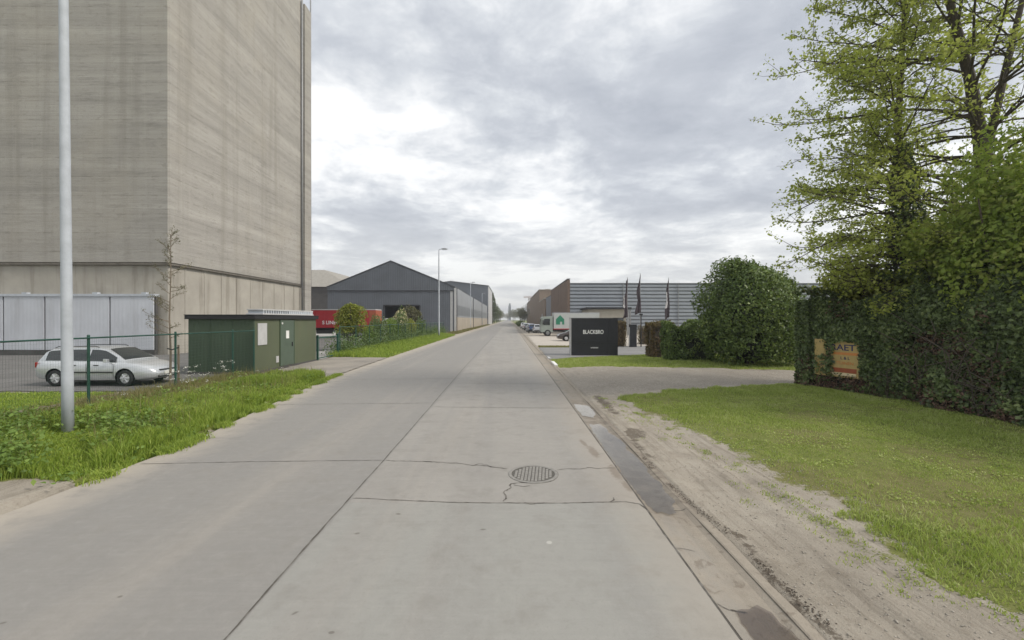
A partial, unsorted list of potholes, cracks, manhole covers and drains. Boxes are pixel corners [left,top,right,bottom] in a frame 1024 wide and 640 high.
crack [368,460,646,509]
